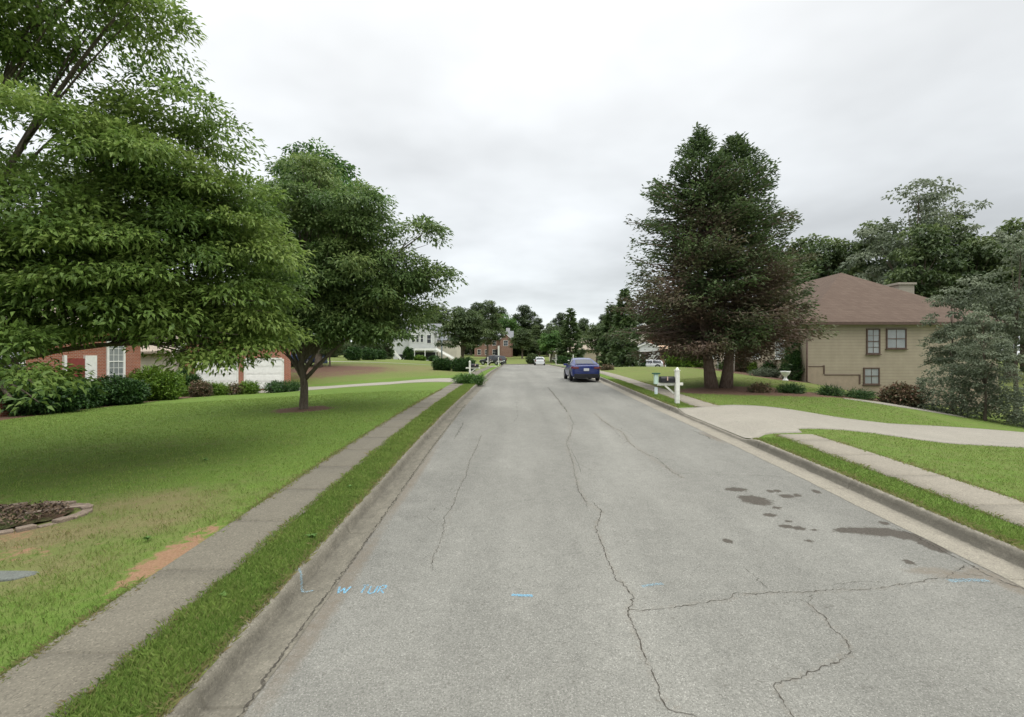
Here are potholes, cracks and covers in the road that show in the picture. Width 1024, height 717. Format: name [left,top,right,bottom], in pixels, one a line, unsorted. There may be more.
crack [567,418,1024,717]
crack [237,404,481,717]
